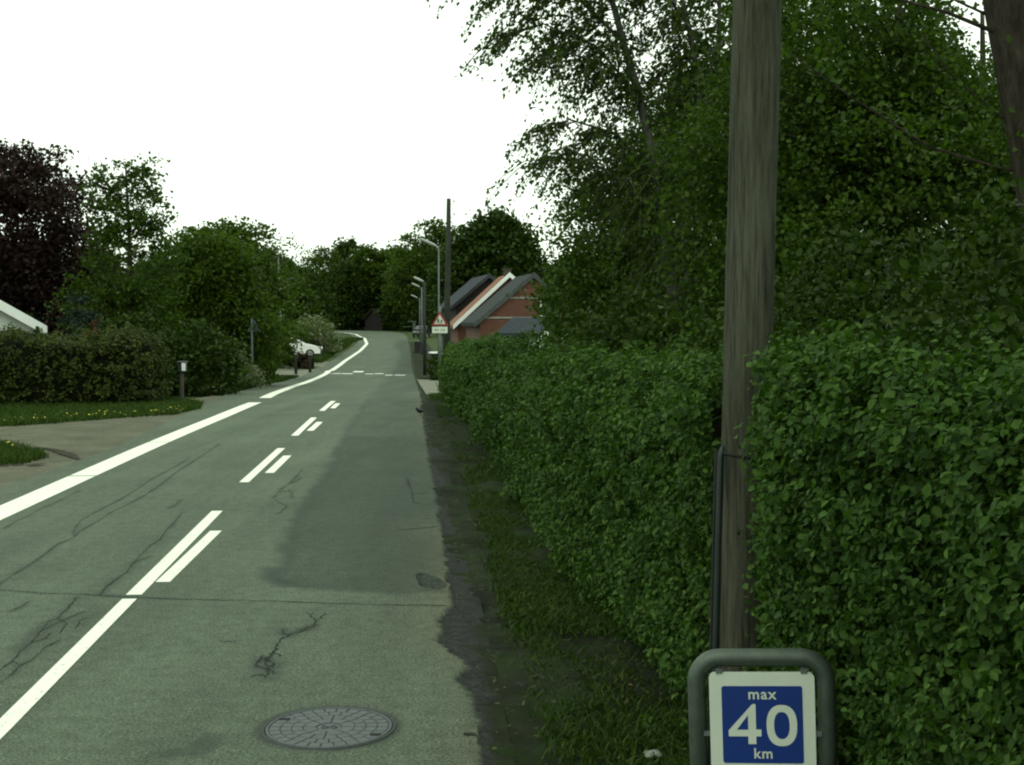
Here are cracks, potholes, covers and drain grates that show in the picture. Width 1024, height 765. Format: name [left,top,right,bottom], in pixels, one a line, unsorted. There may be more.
manhole cover [261,706,396,750]
crack [0,446,450,683]
